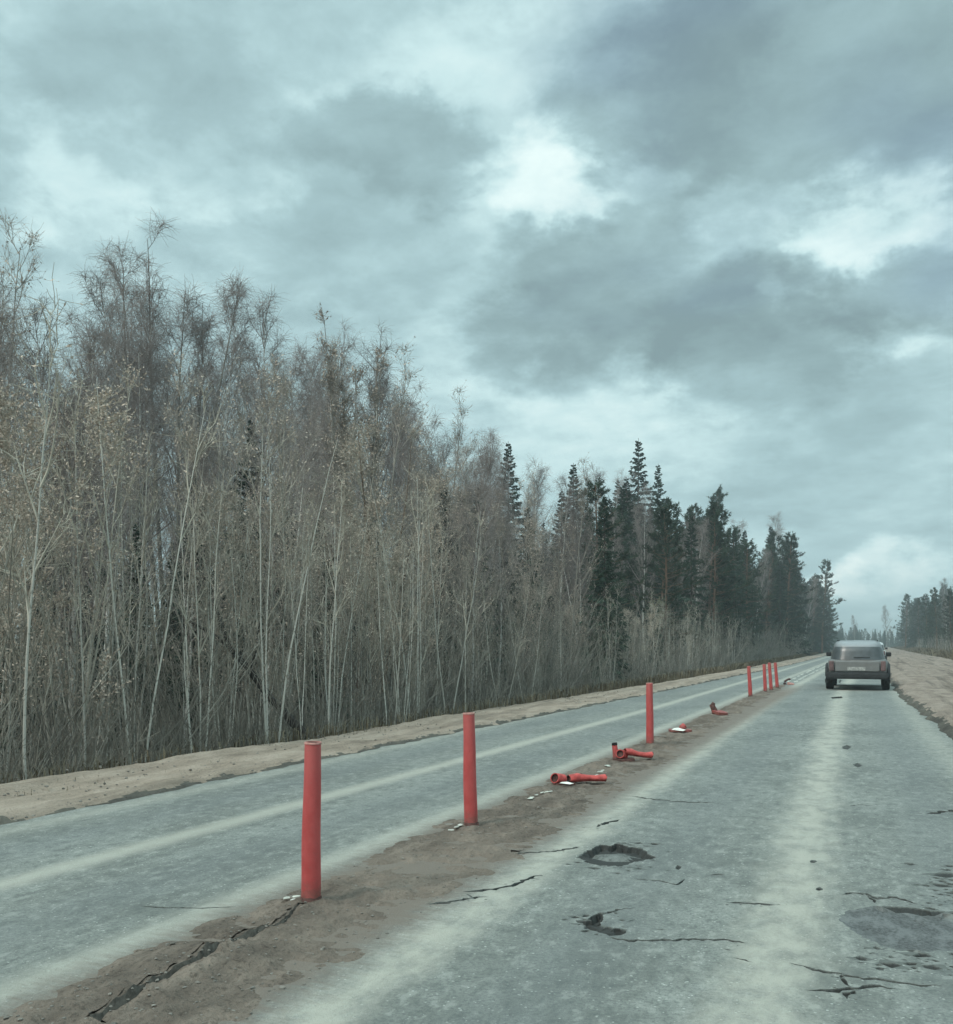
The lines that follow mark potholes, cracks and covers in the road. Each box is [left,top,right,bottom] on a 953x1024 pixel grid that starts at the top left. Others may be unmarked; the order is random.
crack [791,963,941,1000]
pothole [561,912,627,936]
crack [428,875,543,907]
pothole [839,863,953,976]
crack [87,903,303,1023]
crack [606,907,750,962]
pothole [565,842,671,874]
crack [844,892,924,906]
